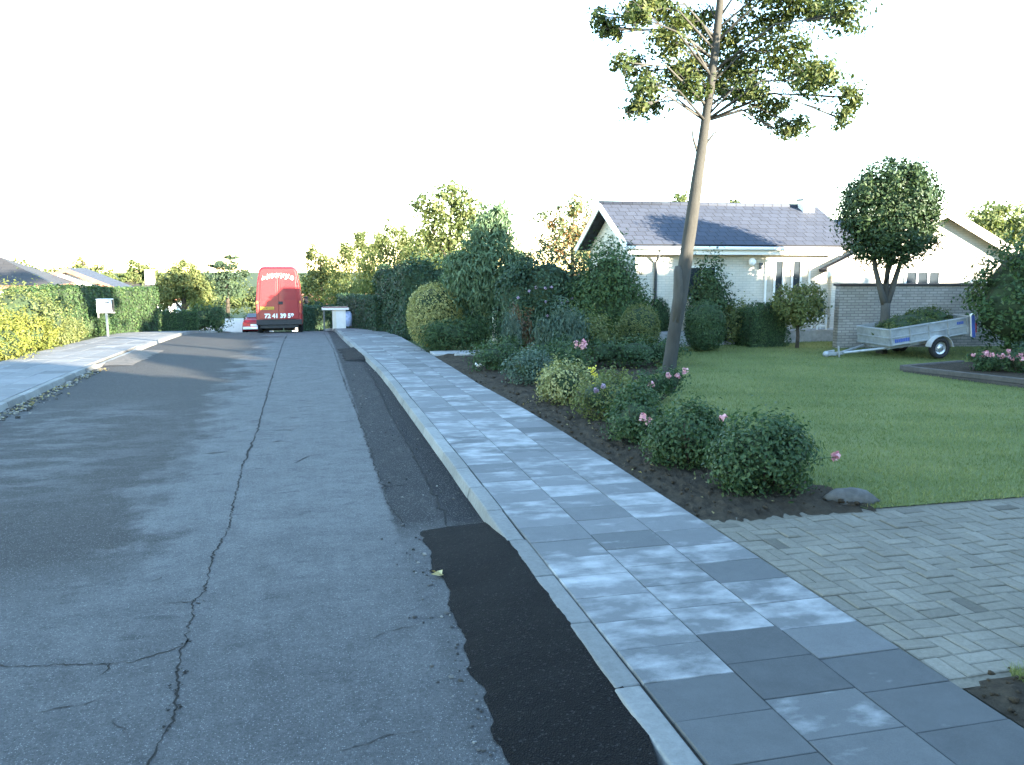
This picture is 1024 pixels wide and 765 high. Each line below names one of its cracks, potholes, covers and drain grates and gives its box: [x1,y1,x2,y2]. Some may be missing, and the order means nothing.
crack [1,336,304,765]
crack [308,728,439,758]
